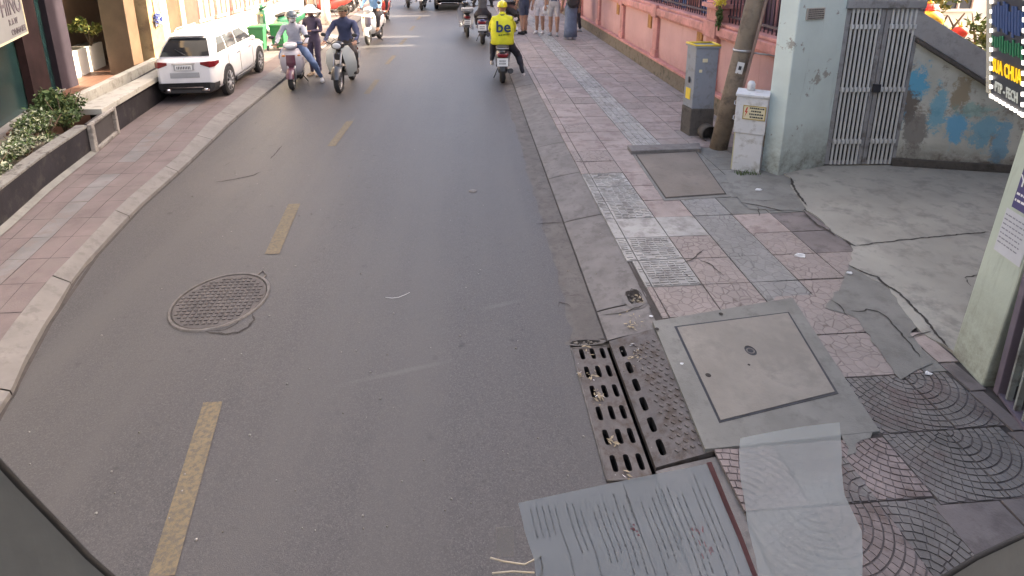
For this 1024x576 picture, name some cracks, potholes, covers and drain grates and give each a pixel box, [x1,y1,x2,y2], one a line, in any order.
utility cover [652,298,880,453]
manhole cover [167,270,271,332]
utility cover [627,143,731,201]
crack [741,177,985,246]
drain grate [571,346,652,482]
crack [835,266,948,356]
crack [205,313,255,335]
